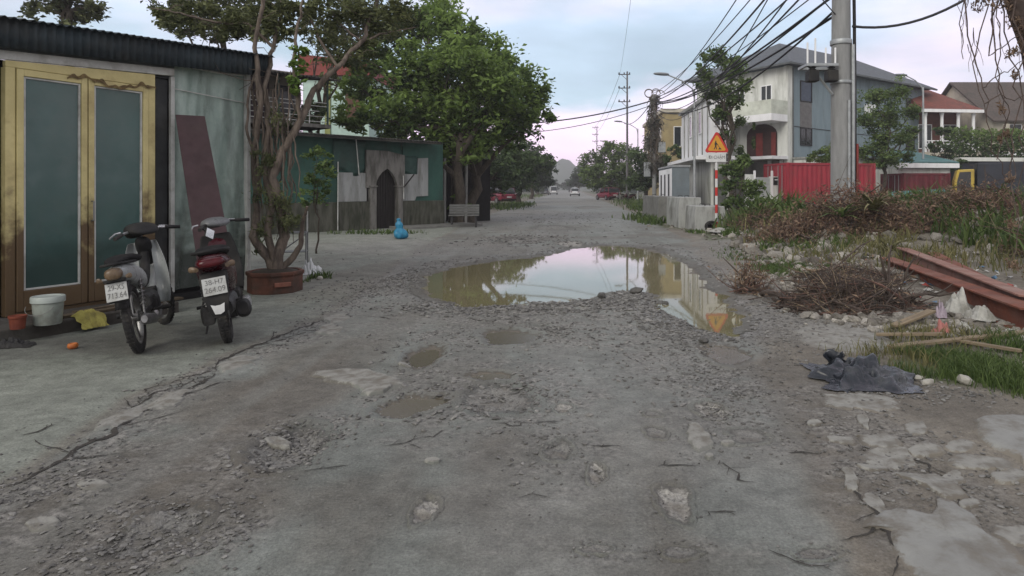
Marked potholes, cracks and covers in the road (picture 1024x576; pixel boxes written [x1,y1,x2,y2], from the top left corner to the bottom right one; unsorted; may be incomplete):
crack [837,467,899,576]
pothole [471,325,549,347]
crack [718,461,750,482]
pothole [406,243,754,337]
pothole [406,493,445,530]
pothole [361,389,455,422]
pothole [394,340,452,374]
pothole [454,368,521,382]
pothole [229,416,341,478]
pothole [650,480,698,530]
crack [0,320,323,488]
pothole [584,459,610,488]
